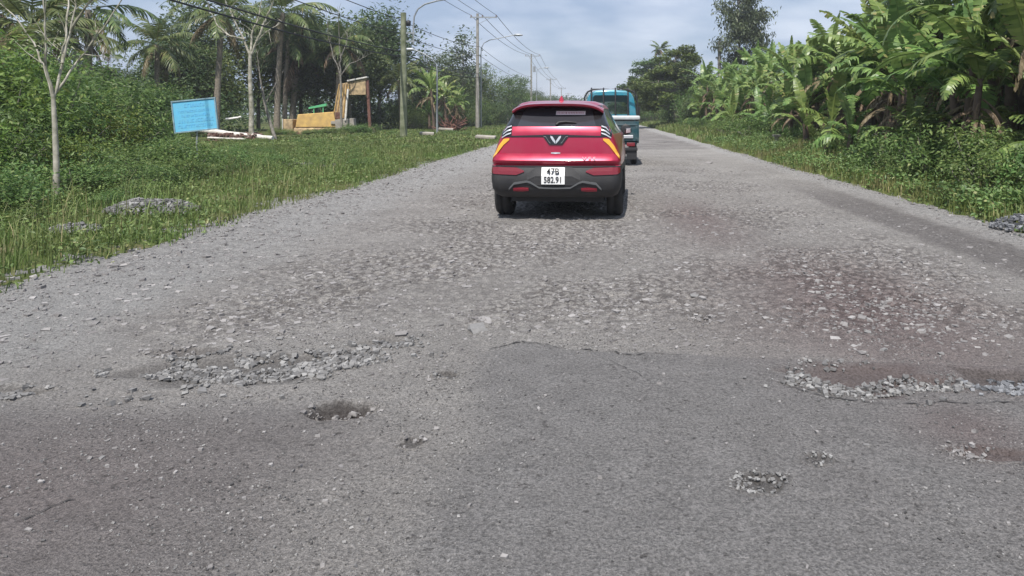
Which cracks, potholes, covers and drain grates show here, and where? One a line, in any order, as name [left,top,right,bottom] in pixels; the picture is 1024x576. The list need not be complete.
pothole [90,350,396,393]
pothole [946,365,1024,397]
pothole [301,398,383,422]
pothole [765,359,977,402]
pothole [395,435,430,451]
pothole [728,469,793,497]
pothole [799,451,836,467]
pothole [937,443,1024,464]
pothole [141,346,227,359]
